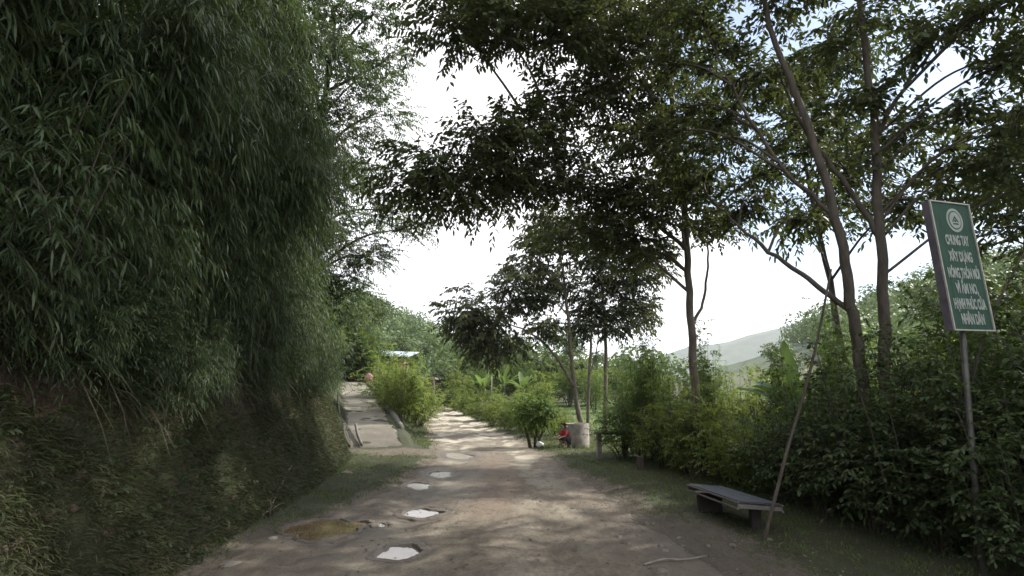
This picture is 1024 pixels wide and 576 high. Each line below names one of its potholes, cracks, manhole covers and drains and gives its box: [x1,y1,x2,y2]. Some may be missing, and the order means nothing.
pothole [441,451,482,461]
pothole [365,540,435,563]
pothole [425,470,459,480]
pothole [401,481,436,492]
pothole [273,517,379,544]
pothole [392,506,455,522]
